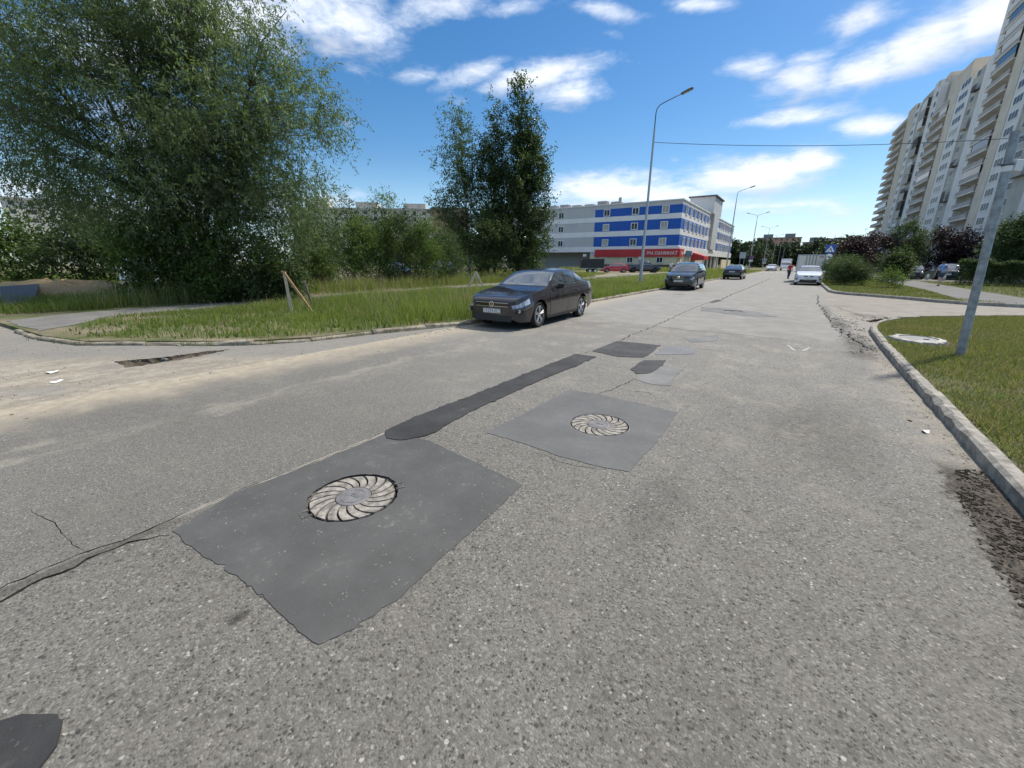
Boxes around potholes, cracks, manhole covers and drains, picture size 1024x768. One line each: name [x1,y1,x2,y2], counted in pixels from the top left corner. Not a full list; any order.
manhole cover [569,414,630,436]
manhole cover [298,475,405,522]
manhole cover [887,334,947,345]
crack [0,433,380,603]
crack [816,296,880,354]
